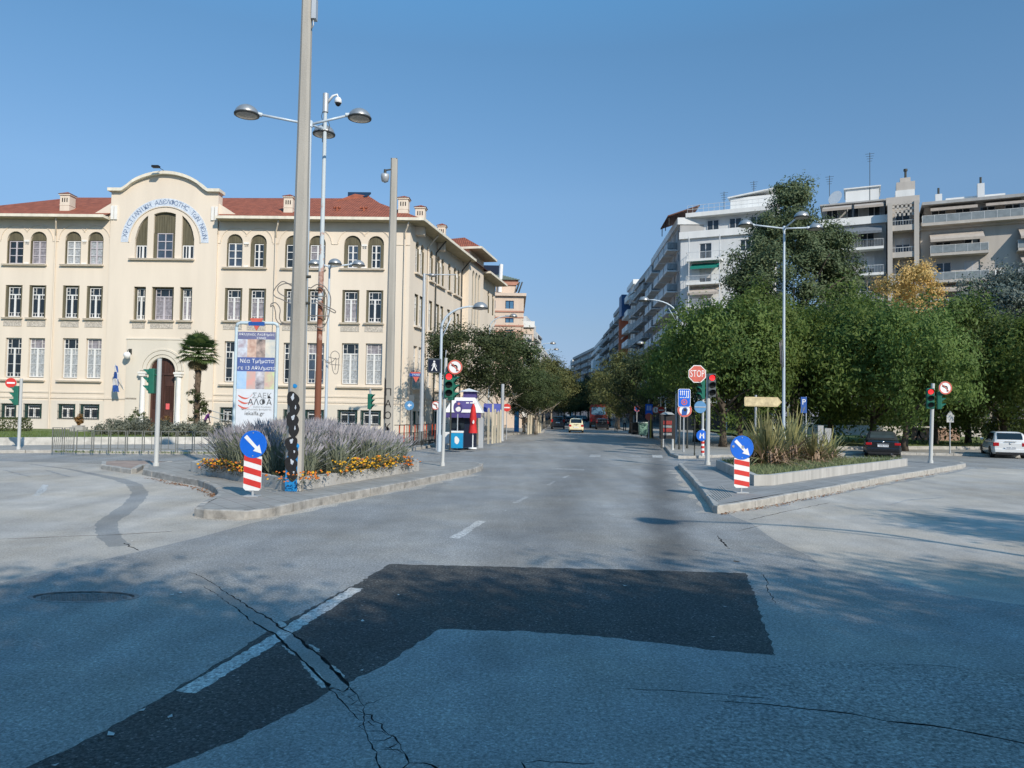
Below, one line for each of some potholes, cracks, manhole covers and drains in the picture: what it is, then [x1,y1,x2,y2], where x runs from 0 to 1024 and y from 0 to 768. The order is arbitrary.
crack [521,760,595,768]
manhole cover [27,591,140,603]
crack [189,572,438,768]
crack [615,688,1024,744]
